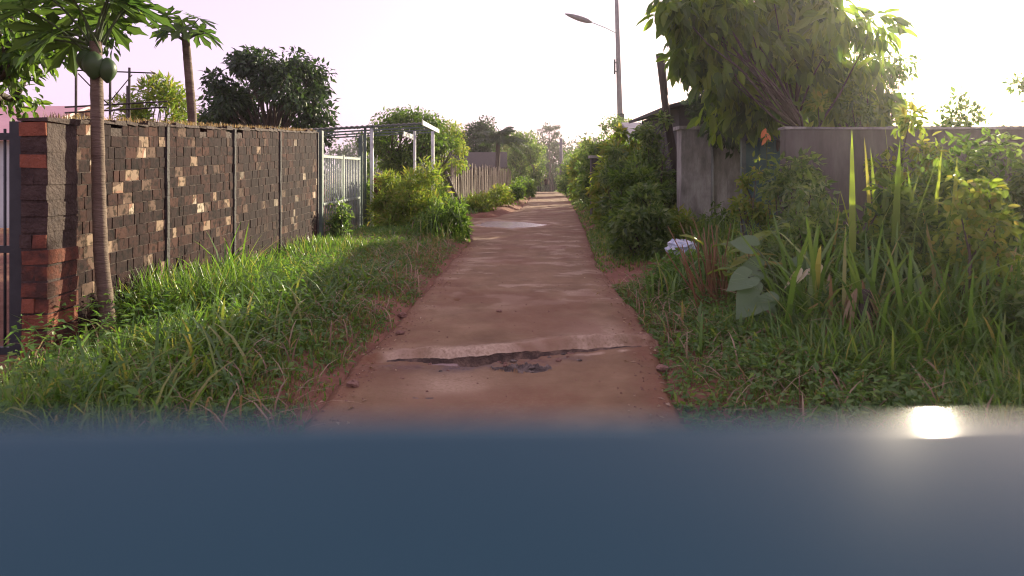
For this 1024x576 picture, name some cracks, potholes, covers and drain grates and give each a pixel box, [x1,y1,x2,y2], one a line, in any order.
pothole [491,362,552,374]
